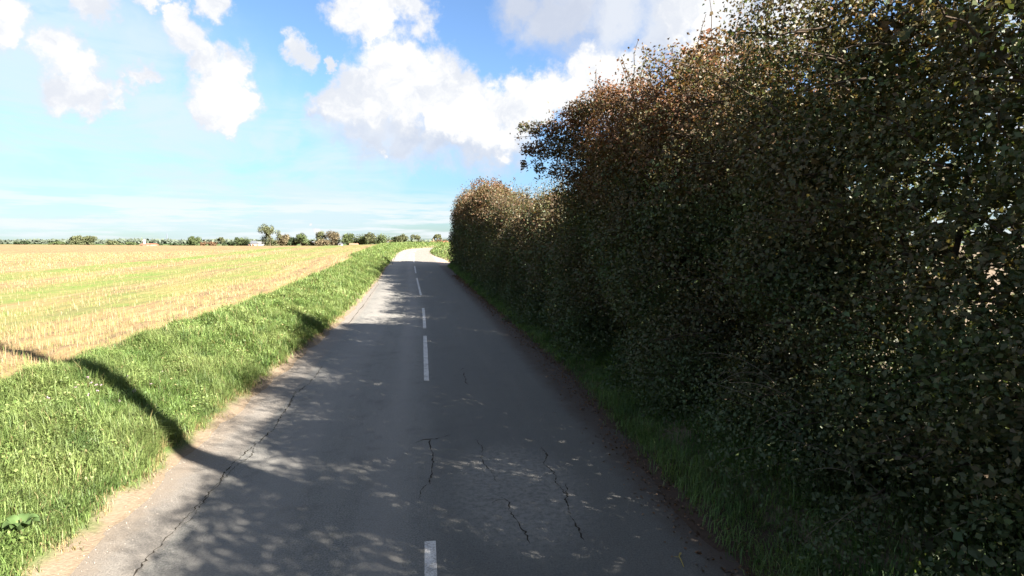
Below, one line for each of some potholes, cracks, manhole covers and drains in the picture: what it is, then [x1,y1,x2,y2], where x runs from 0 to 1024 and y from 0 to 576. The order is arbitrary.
crack [133,371,319,576]
crack [541,447,583,539]
crack [415,436,445,494]
crack [496,498,530,543]
